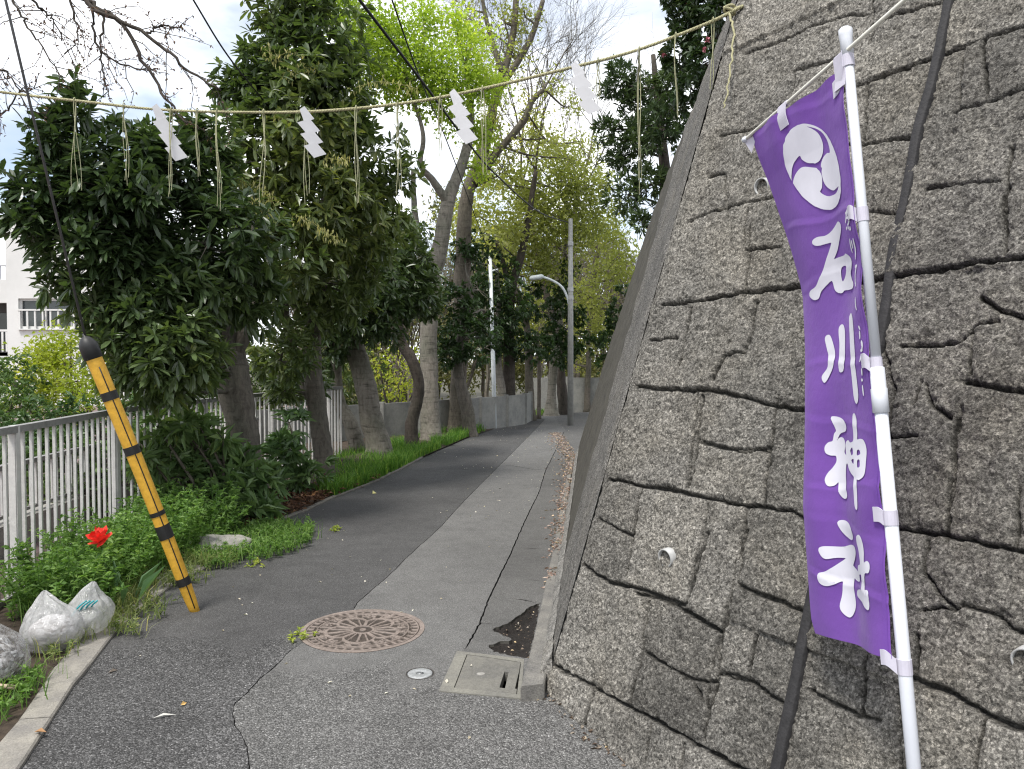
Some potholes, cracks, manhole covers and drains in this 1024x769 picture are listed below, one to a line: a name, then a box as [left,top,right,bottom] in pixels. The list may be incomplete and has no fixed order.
crack [232,646,297,769]
utility cover [405,667,435,680]
pothole [489,603,541,658]
manhole cover [299,609,425,653]
crack [353,432,564,648]
